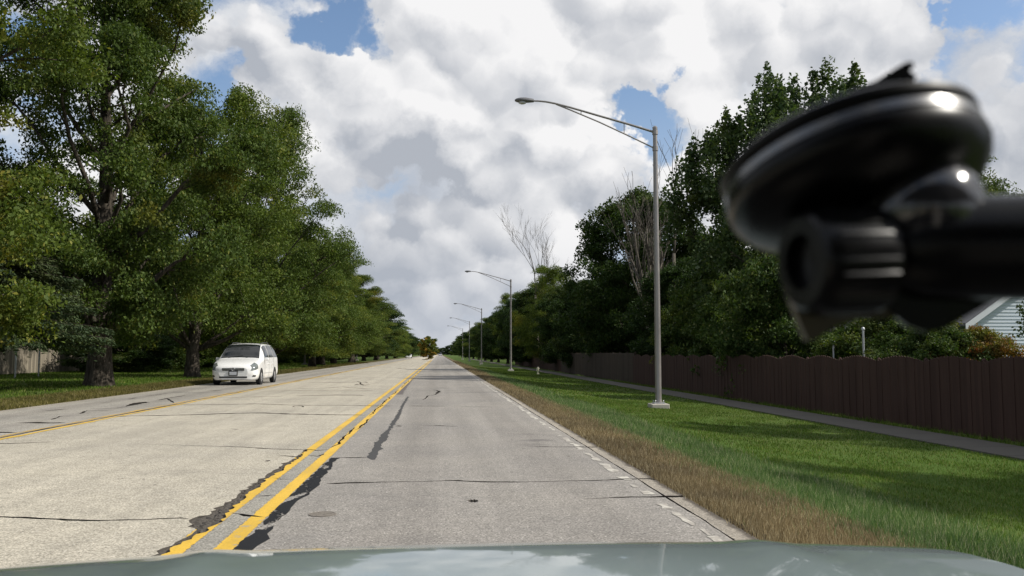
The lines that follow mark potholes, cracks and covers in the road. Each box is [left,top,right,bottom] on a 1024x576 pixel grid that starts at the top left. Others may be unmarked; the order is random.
crack [149,368,735,550]
crack [103,393,185,409]
